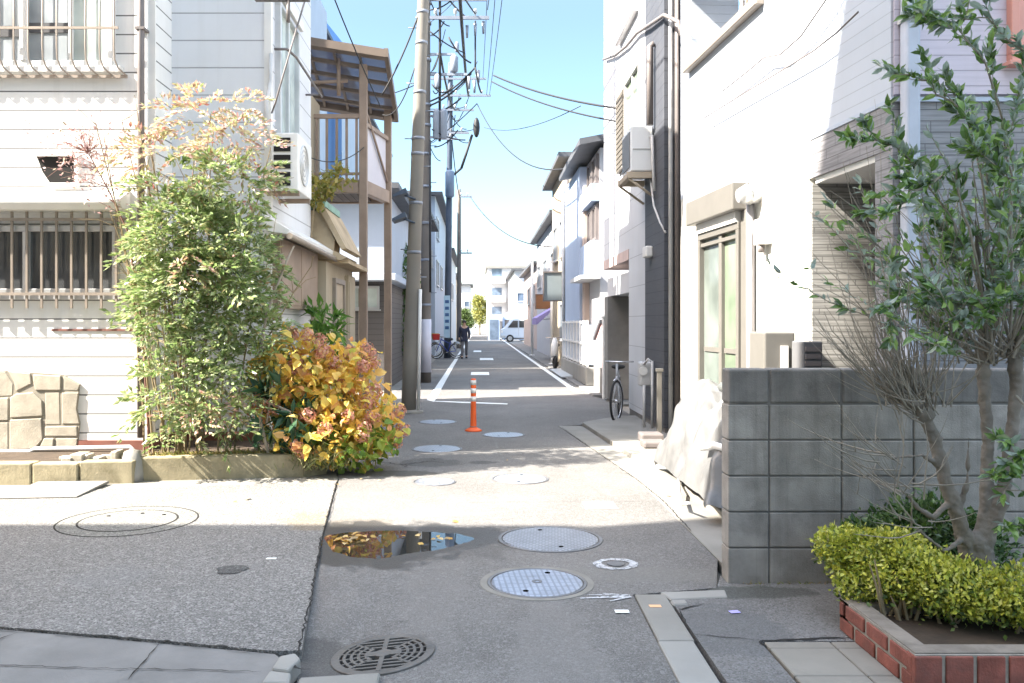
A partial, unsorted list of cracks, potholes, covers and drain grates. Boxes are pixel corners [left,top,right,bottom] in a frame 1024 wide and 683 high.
manhole cover [498,526,603,553]
drain grate [331,634,435,676]
manhole cover [411,445,462,453]
utility cover [593,558,638,569]
manhole cover [53,506,199,537]
manhole cover [413,478,456,486]
manhole cover [480,566,594,601]
manhole cover [492,473,549,484]
crack [674,604,850,645]
